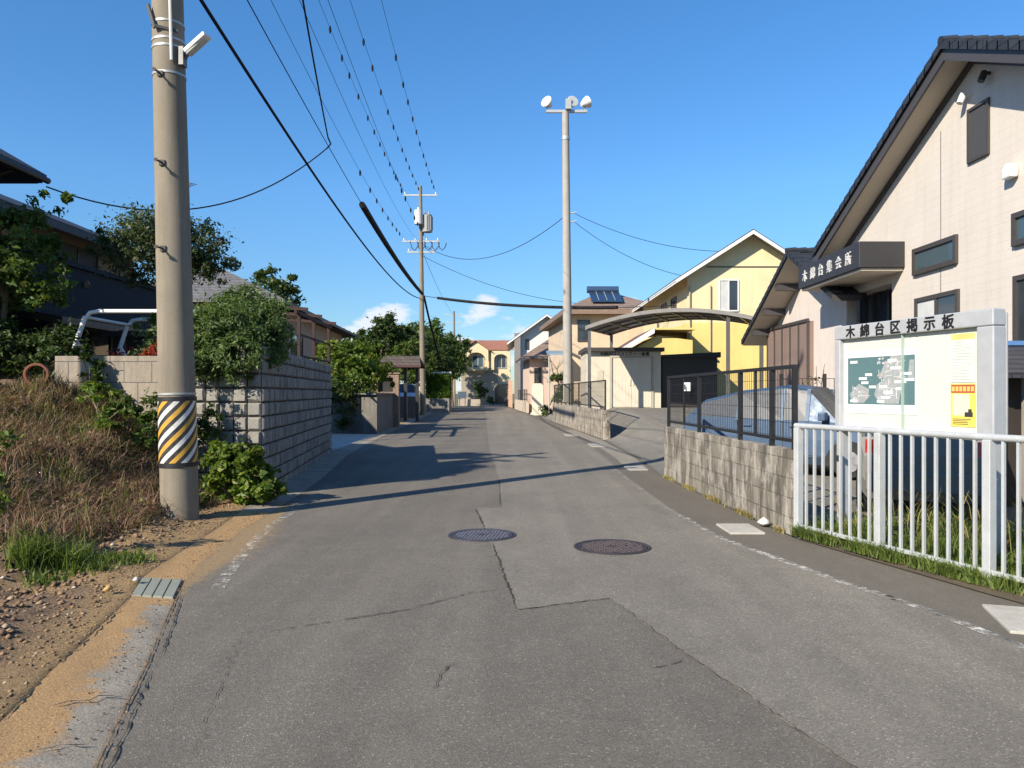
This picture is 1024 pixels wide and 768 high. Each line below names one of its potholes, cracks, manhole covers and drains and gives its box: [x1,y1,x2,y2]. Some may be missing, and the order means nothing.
manhole cover [574,539,651,555]
crack [243,589,497,633]
manhole cover [448,528,516,542]
